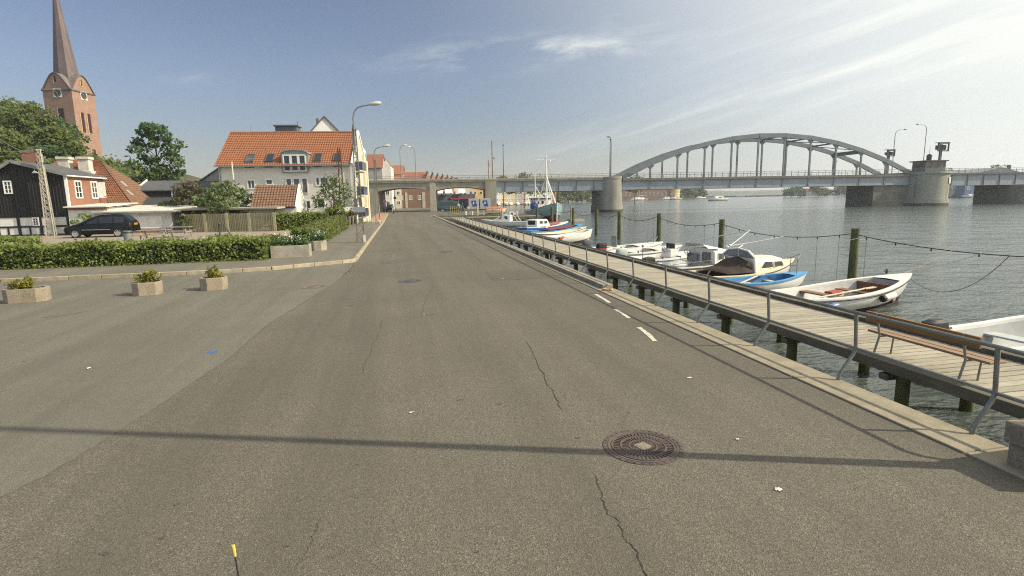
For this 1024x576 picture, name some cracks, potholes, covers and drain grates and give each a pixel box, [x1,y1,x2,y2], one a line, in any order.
crack [595,475,648,576]
manhole cover [603,430,684,465]
crack [527,343,562,410]
